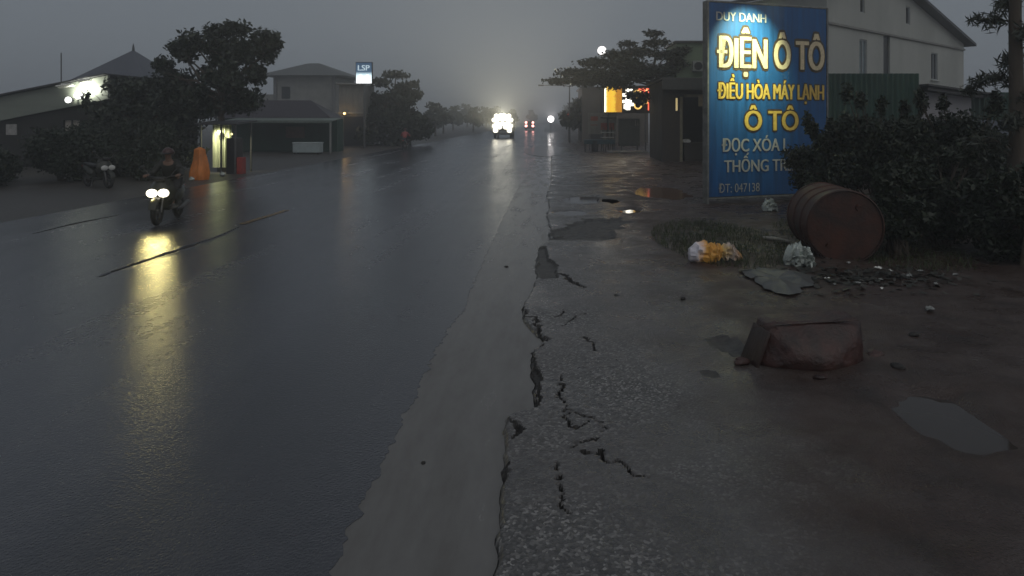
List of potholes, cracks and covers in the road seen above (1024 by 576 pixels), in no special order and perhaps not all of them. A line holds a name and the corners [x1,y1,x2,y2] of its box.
pothole [535,246,560,279]
crack [509,307,644,514]
pothole [548,216,637,240]
crack [499,461,510,499]
crack [559,273,587,288]
